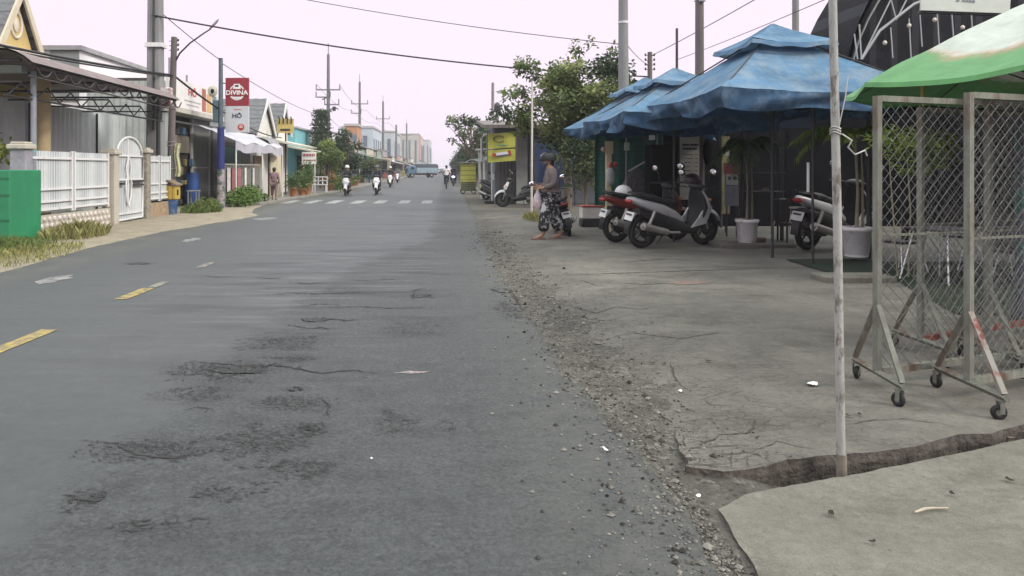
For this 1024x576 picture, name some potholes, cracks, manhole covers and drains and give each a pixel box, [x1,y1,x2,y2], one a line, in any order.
crack [164,277,450,412]
pothole [209,364,273,374]
crack [678,401,813,468]
